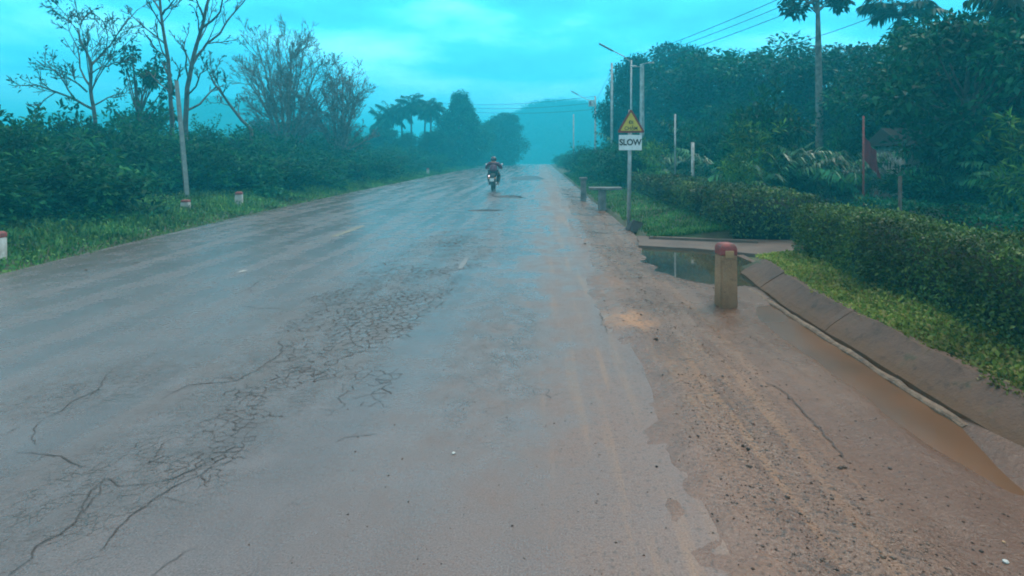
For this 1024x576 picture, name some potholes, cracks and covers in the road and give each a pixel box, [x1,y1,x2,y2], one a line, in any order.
crack [756,376,847,461]
crack [9,225,496,574]
